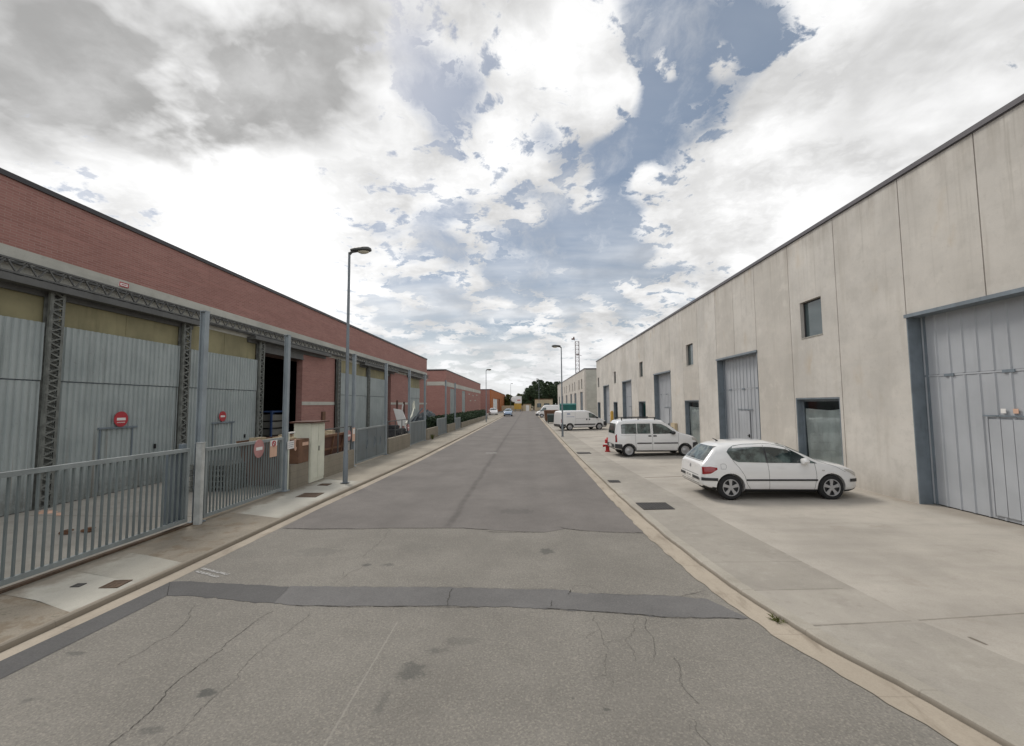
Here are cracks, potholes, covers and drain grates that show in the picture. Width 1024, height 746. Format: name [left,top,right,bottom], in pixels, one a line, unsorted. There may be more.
crack [109,613,268,745]
manhole cover [99,579,133,588]
crack [163,585,731,745]
